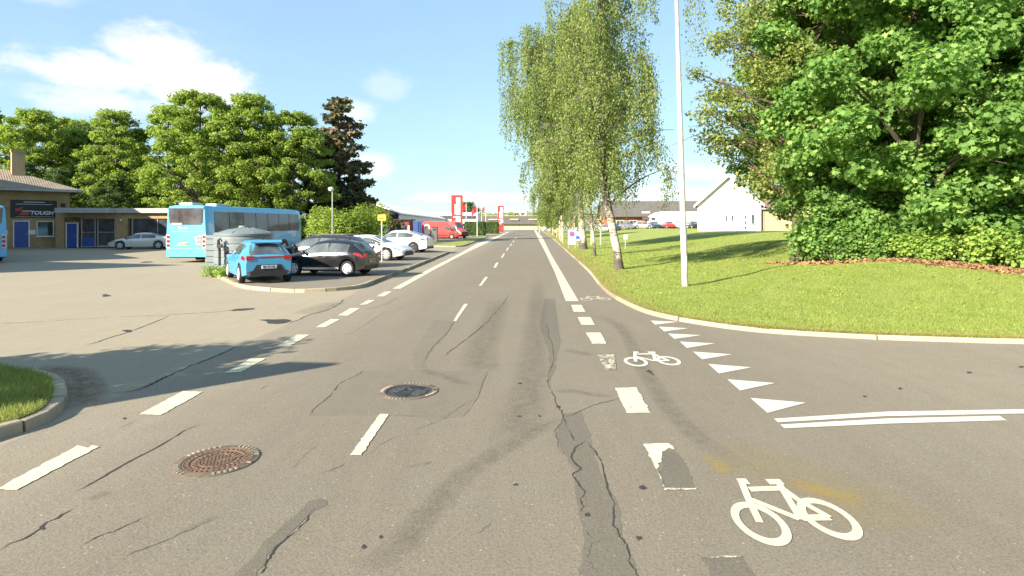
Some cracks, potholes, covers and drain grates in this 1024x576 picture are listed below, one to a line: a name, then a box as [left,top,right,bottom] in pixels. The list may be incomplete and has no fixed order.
crack [6,428,189,546]
manhole cover [379,382,438,400]
crack [539,380,638,576]
manhole cover [171,445,260,478]
